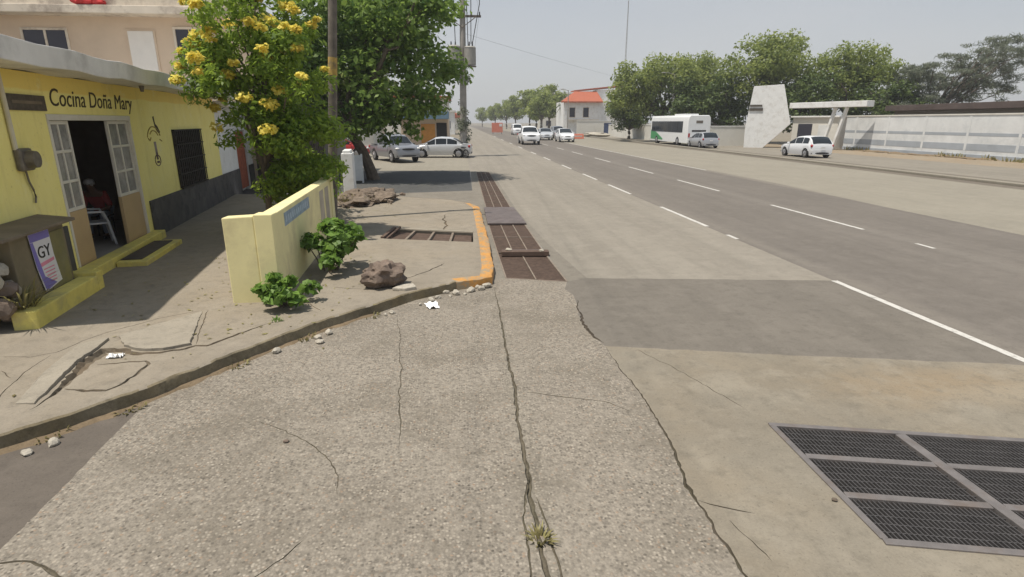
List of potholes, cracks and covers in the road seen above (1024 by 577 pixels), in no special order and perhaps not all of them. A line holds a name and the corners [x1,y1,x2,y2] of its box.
crack [495,292,772,577]
drain grate [476,172,510,207]
drain grate [488,225,542,254]
drain grate [768,422,1024,557]
crack [30,311,273,410]
crack [258,421,339,490]
drain grate [497,253,568,282]
